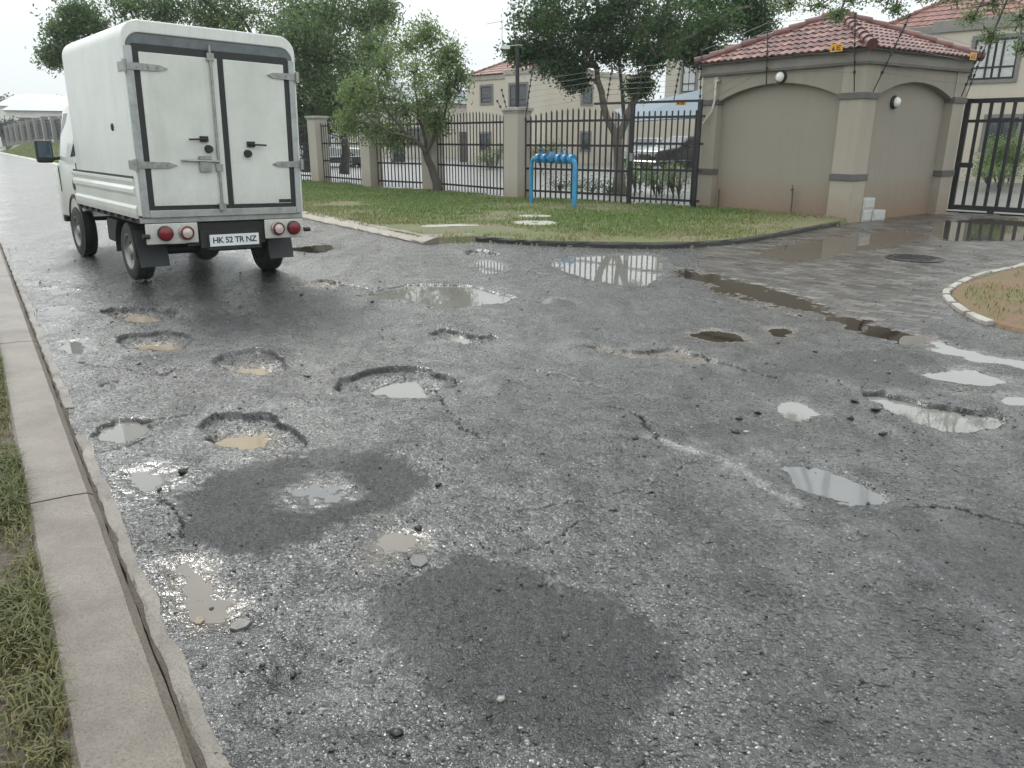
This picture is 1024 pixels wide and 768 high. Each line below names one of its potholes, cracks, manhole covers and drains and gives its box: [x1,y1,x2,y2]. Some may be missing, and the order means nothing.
crack [511,497,585,555]
pothole [581,345,721,365]
pothole [113,329,198,351]
crack [436,394,492,440]
pothole [333,365,462,399]
pothole [753,452,915,520]
pothole [193,411,309,454]
pothole [363,284,516,309]
pothole [212,347,292,375]
manhole cover [885,254,945,263]
pothole [89,416,157,444]
pothole [427,328,500,344]
